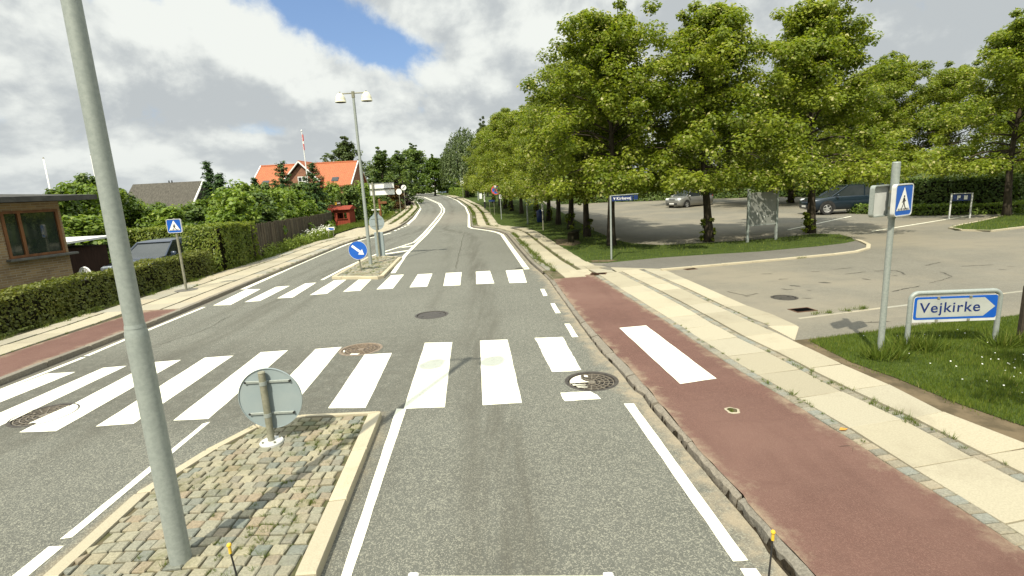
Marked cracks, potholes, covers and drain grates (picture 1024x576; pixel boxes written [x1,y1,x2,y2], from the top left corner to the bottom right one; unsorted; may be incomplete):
crack [785,262,950,292]
manhole cover [415,311,448,319]
manhole cover [565,371,619,391]
manhole cover [339,343,383,356]
manhole cover [5,403,80,428]
